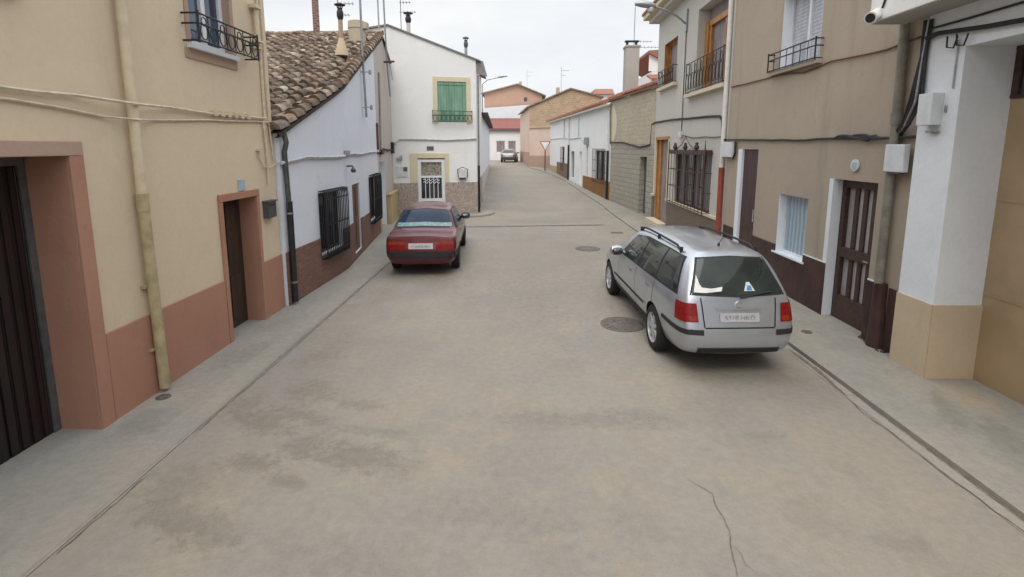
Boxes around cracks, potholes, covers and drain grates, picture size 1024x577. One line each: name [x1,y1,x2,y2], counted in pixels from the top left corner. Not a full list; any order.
crack [847,397,1024,531]
crack [689,479,758,577]
manhole cover [600,317,644,332]
